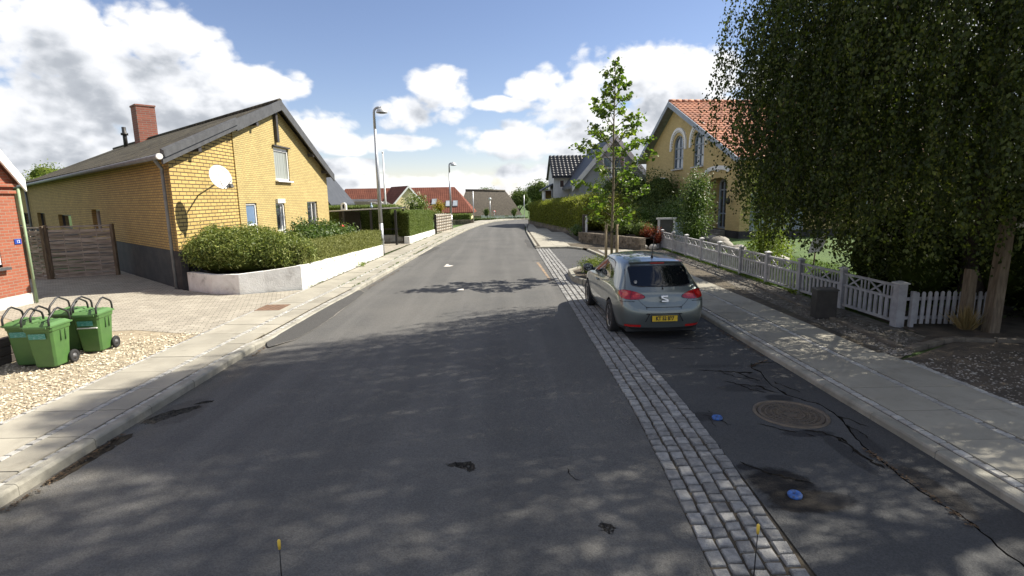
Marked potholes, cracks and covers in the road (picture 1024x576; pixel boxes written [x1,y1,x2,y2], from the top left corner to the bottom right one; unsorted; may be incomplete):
crack [703,361,1024,567]
pothole [141,405,202,424]
pothole [446,461,476,472]
manhole cover [752,400,831,429]
pothole [43,433,133,486]
pothole [598,521,616,534]
